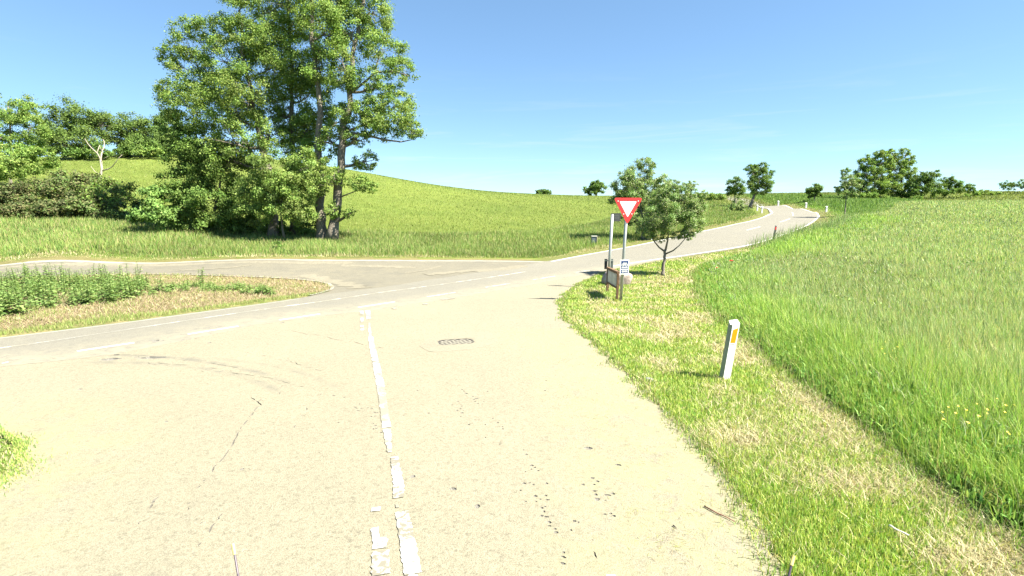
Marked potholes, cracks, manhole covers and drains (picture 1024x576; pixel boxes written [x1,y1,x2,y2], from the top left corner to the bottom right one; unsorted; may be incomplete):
crack [180,398,261,554]
